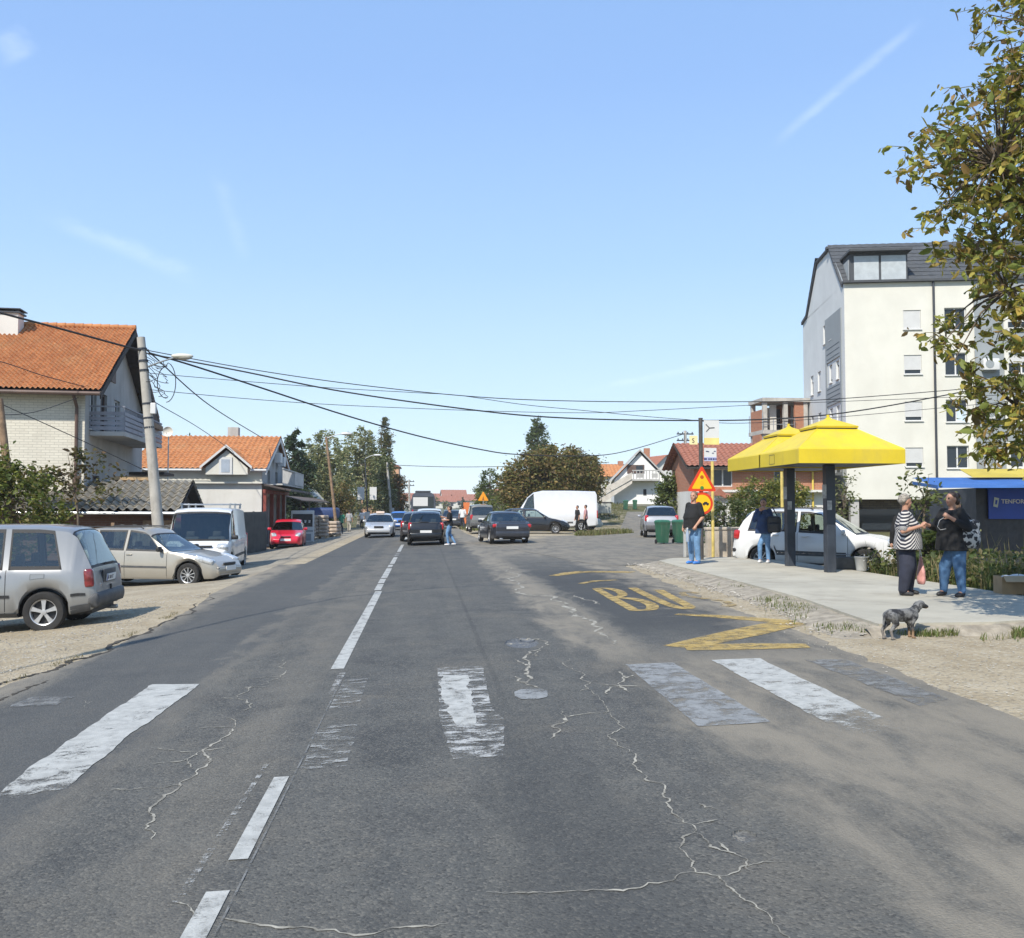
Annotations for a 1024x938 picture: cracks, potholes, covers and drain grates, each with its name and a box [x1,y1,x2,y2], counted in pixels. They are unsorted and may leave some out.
pothole [505,638,539,648]
crack [488,659,790,938]
crack [128,659,287,840]
crack [225,918,447,936]
crack [515,637,549,688]
